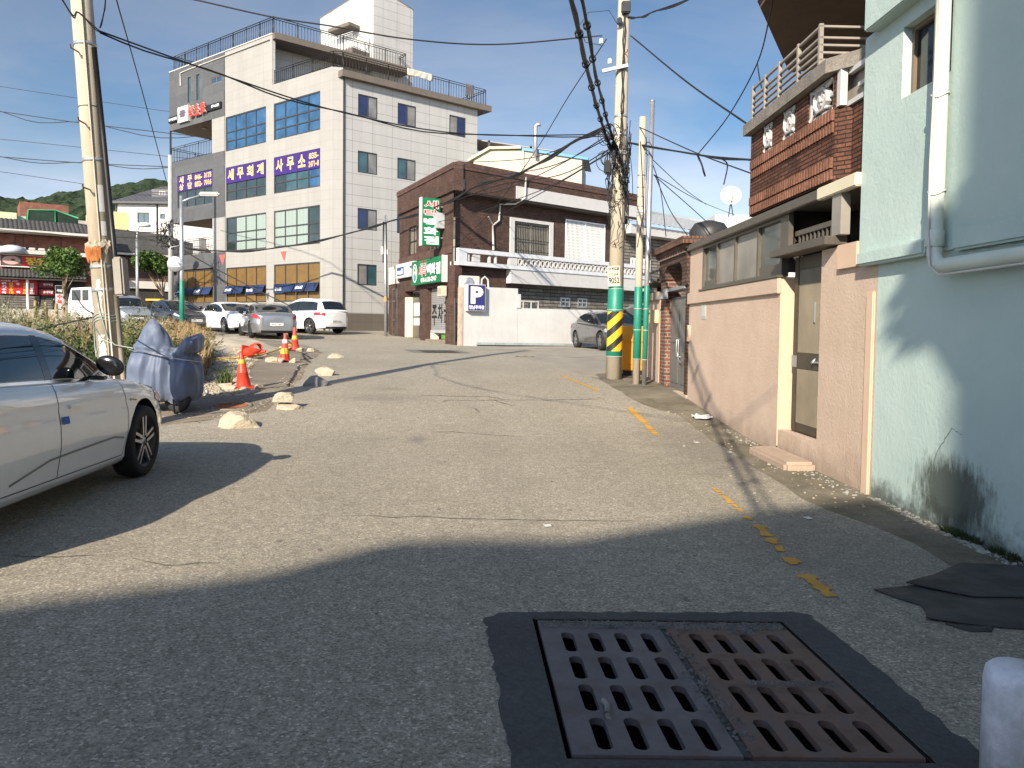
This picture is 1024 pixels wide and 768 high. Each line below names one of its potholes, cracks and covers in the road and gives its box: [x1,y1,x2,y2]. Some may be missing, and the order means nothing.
manhole cover [209,402,253,410]
crack [430,395,569,413]
crack [0,554,211,565]
crack [265,352,313,388]
